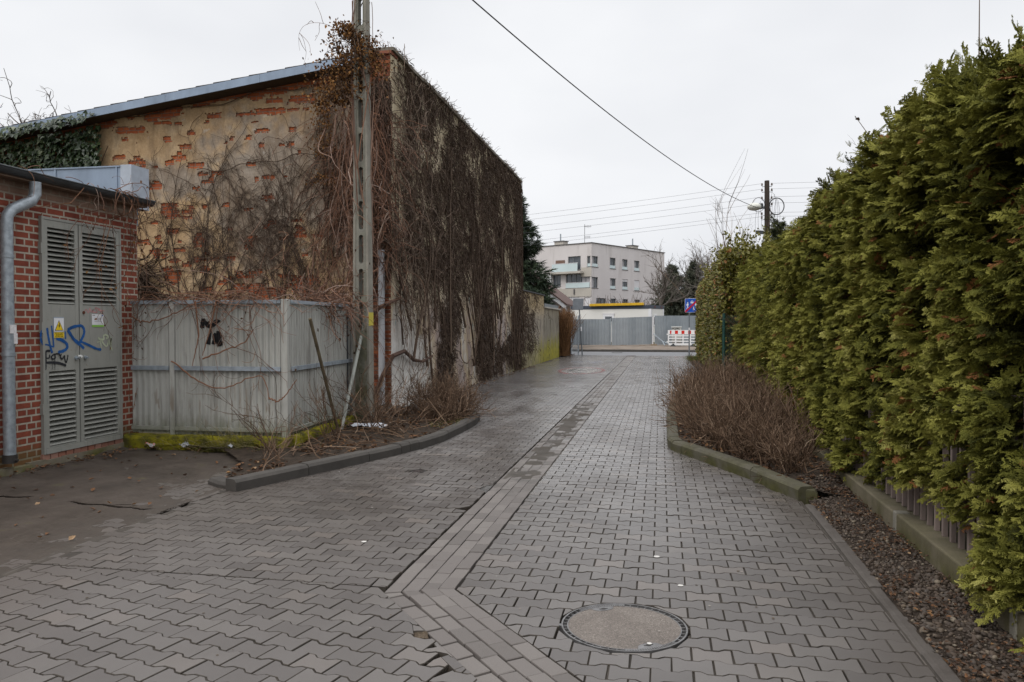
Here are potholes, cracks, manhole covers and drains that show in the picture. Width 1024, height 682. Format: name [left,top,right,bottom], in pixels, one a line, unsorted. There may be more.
crack [71,501,190,516]
manhole cover [559,603,688,654]
